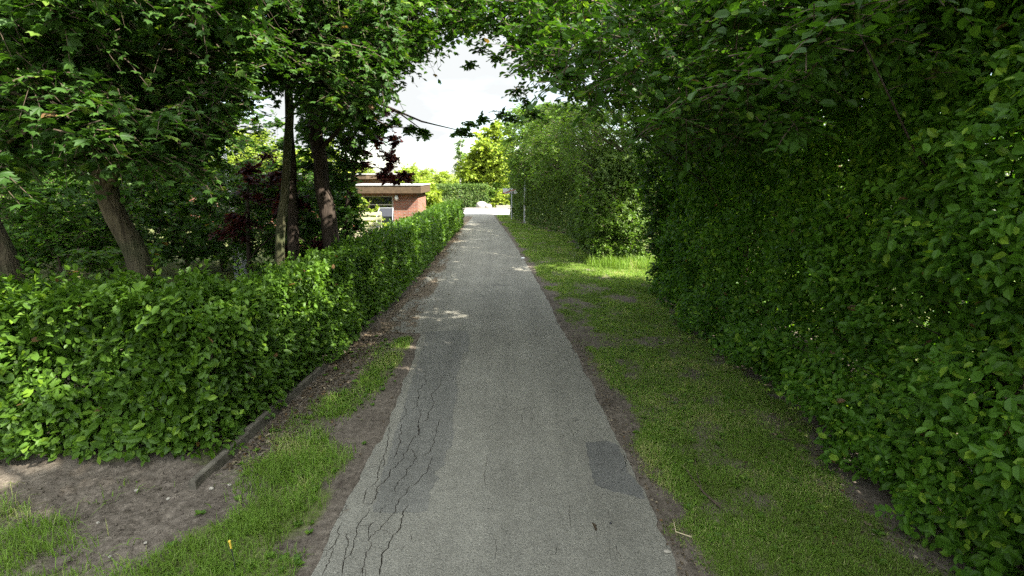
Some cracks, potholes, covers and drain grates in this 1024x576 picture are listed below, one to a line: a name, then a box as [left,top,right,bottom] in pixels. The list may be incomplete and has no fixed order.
crack [322,371,454,576]
